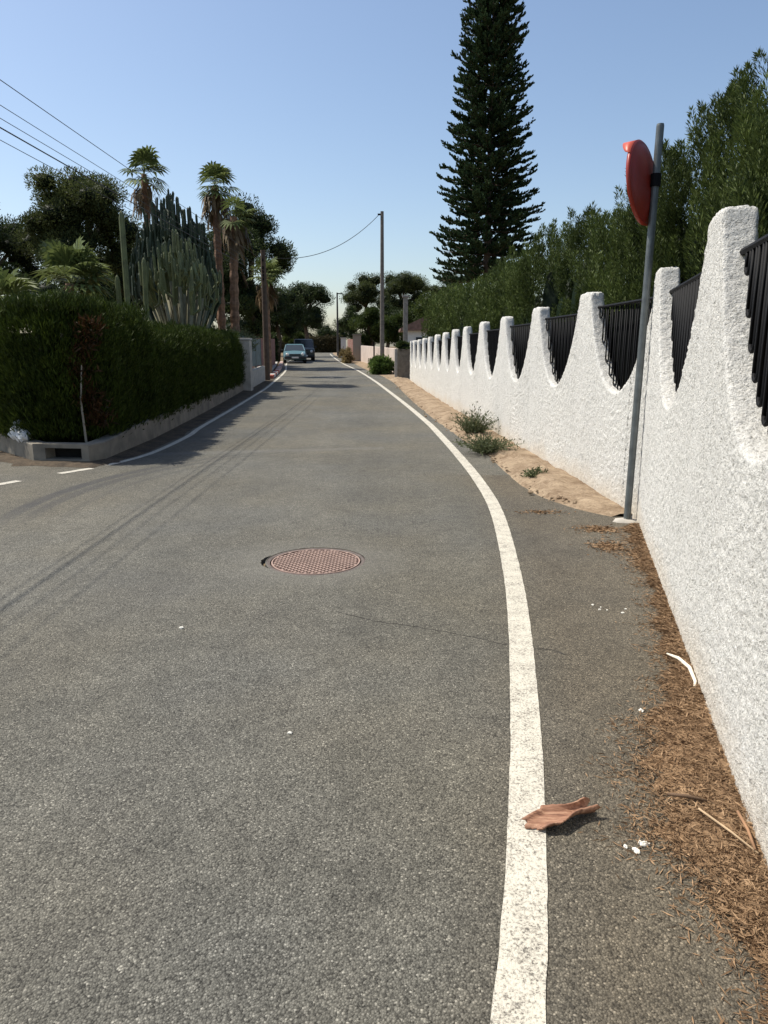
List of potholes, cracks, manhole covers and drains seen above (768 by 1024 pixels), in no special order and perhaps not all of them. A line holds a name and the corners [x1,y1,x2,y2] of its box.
manhole cover [266,548,365,576]
crack [336,611,567,655]
